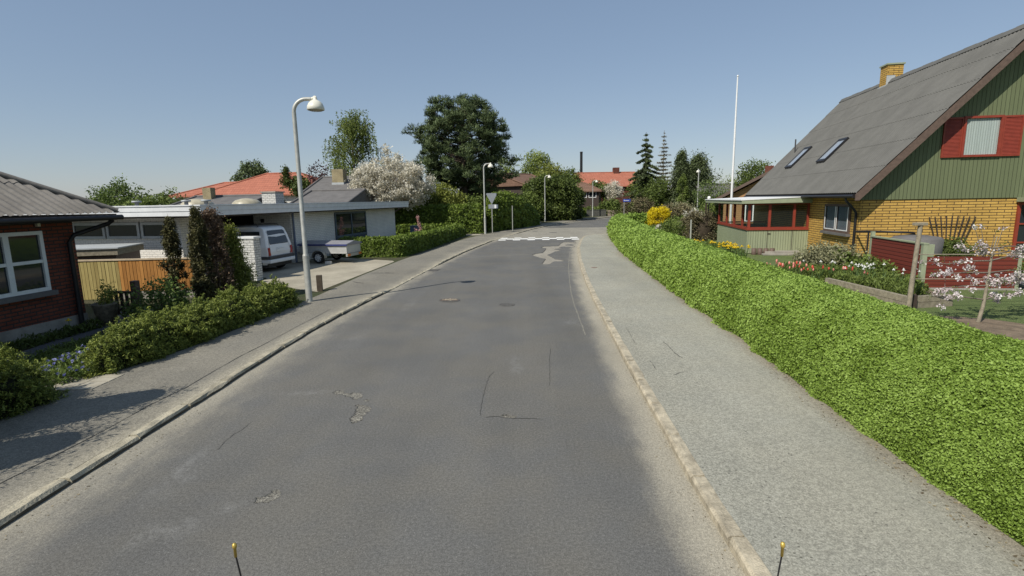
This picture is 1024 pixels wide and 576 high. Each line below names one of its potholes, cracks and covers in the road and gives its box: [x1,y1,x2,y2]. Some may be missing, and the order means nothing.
pothole [332,390,363,400]
crack [550,254,586,335]
pothole [349,404,372,424]
crack [480,349,551,419]
pothole [253,489,281,503]
